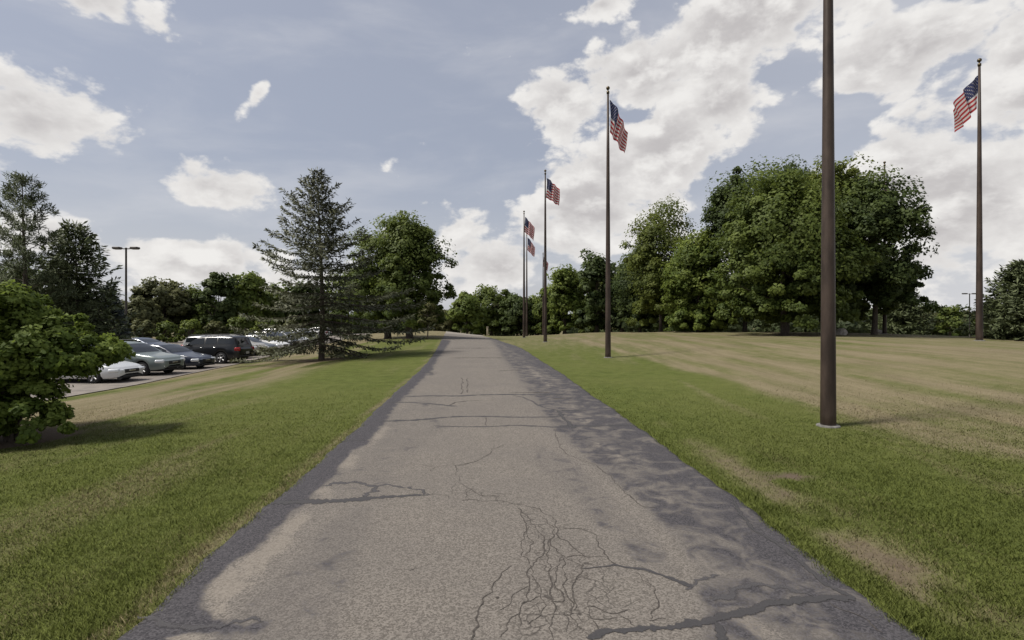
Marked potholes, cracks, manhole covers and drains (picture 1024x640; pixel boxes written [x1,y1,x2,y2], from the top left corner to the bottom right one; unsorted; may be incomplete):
crack [554,429,644,507]
crack [430,446,660,640]
